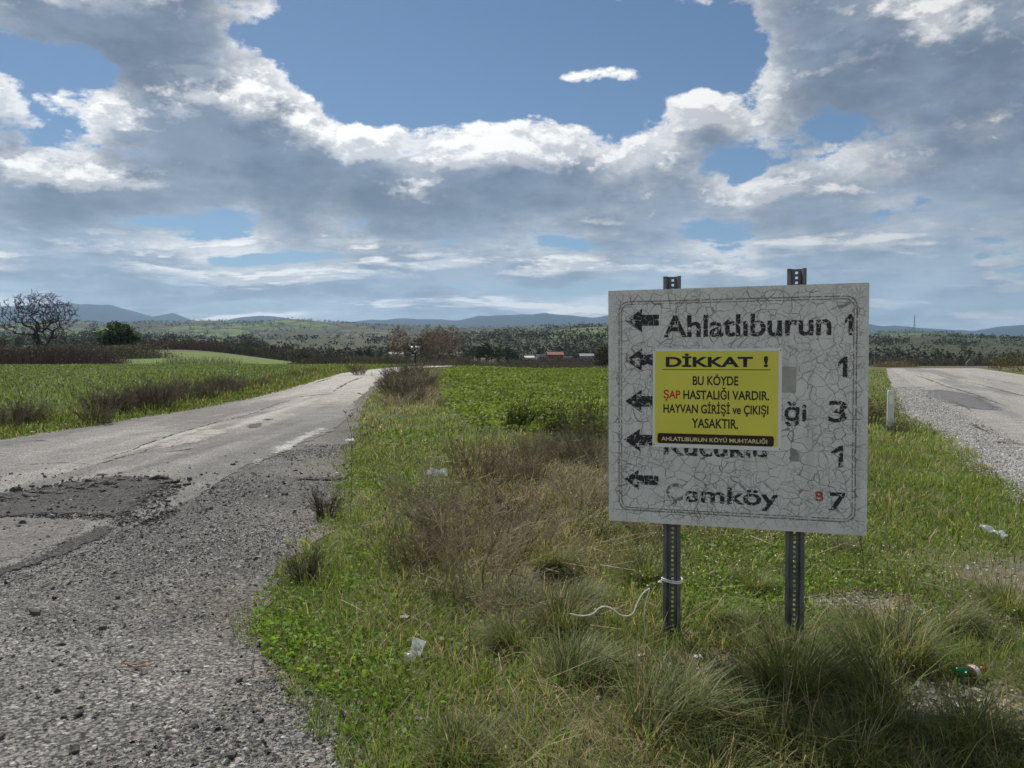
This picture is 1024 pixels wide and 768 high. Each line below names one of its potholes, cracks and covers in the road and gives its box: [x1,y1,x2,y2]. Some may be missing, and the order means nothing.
pothole [0,475,169,523]
